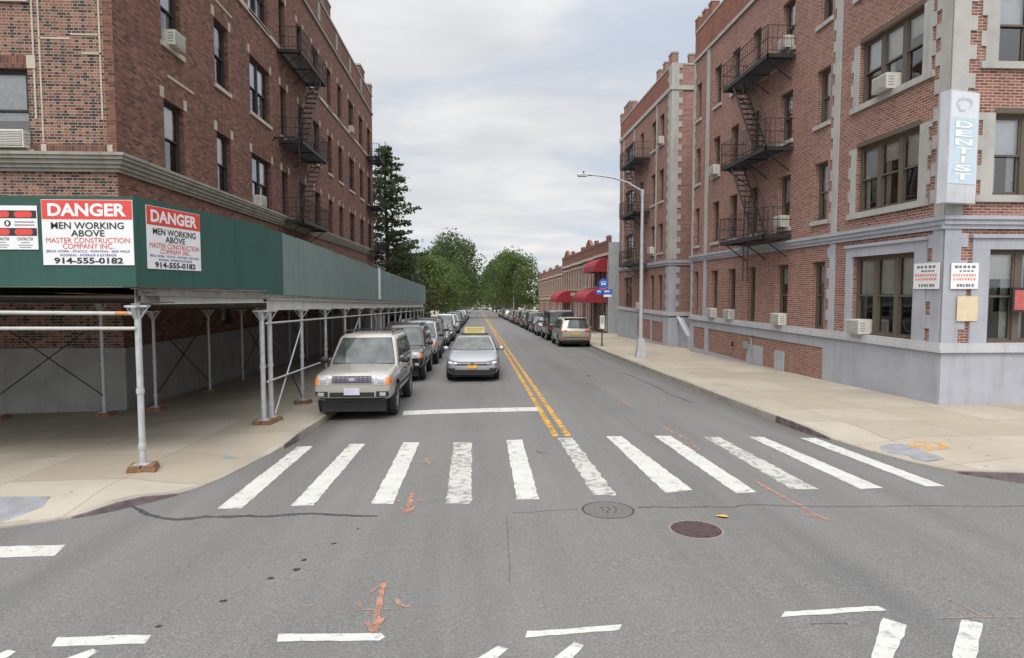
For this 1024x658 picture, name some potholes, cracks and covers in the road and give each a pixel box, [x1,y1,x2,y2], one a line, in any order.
manhole cover [581,501,635,519]
crack [506,509,577,583]
crack [624,373,693,403]
crack [133,507,378,521]
manhole cover [668,520,724,539]
